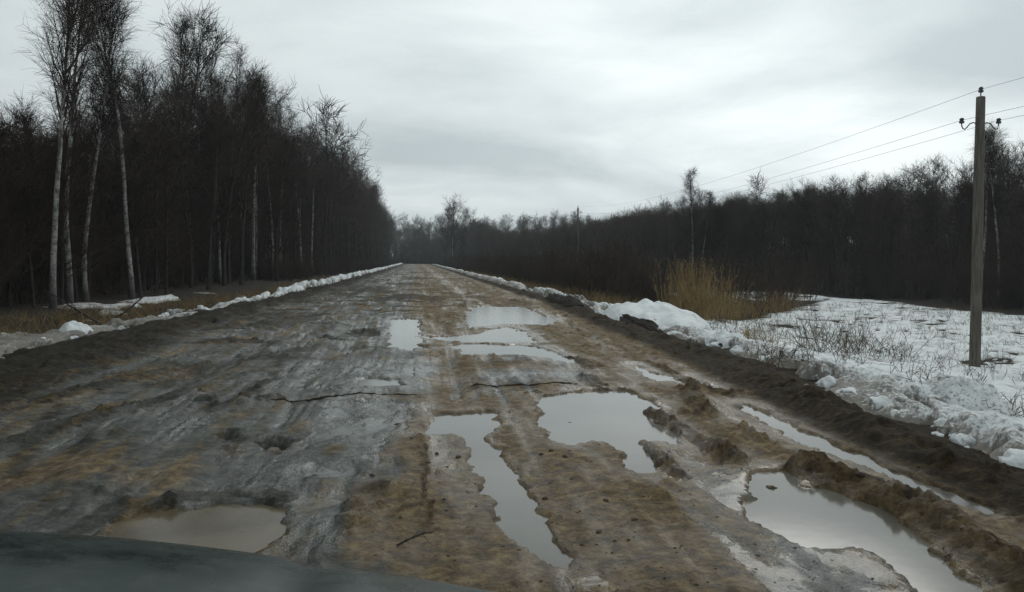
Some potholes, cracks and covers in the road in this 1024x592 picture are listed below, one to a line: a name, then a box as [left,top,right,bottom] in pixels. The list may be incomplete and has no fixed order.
crack [272,392,423,402]
pothole [448,342,581,363]
pothole [251,433,305,455]
pothole [734,456,1008,592]
pothole [733,399,1024,533]
pothole [380,318,431,351]
pothole [530,386,692,474]
